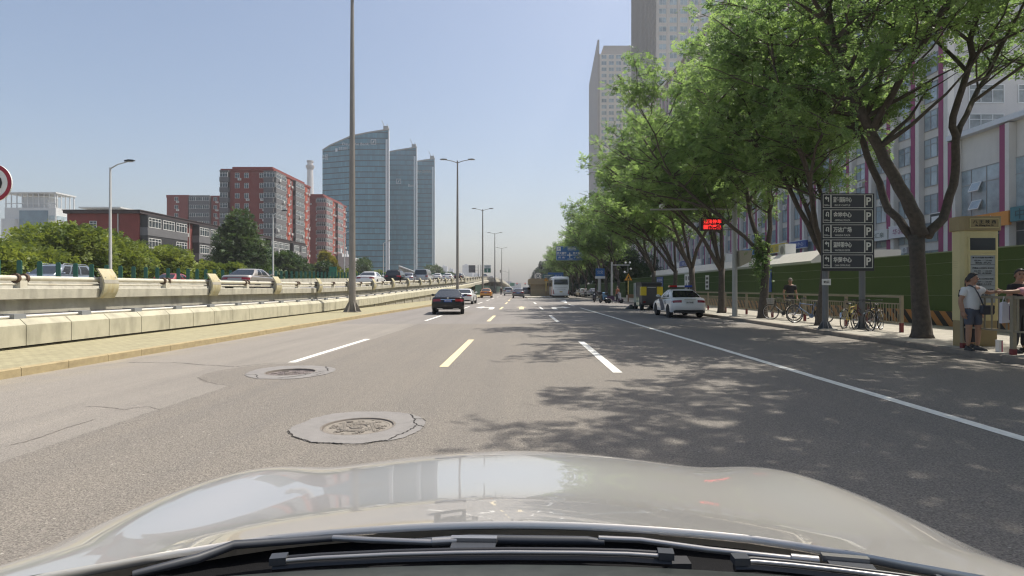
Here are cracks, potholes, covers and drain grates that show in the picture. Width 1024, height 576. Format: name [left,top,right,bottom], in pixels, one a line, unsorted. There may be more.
manhole cover [289,411,426,444]
manhole cover [245,365,336,379]
crack [12,406,160,445]
